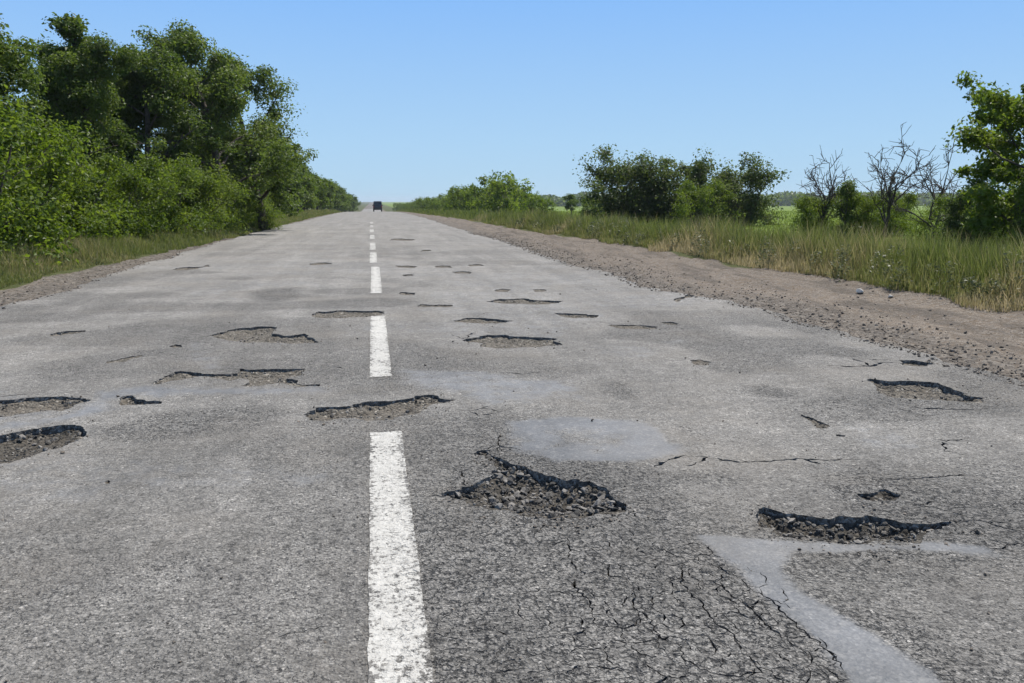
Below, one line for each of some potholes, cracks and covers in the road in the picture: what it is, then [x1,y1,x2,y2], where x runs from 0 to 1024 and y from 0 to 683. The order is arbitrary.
pothole [756,507,949,545]
pothole [857,489,901,501]
pothole [0,396,90,417]
pothole [0,425,87,463]
crack [654,456,851,467]
pothole [463,335,562,349]
pothole [867,379,983,403]
pothole [312,310,384,318]
pothole [210,326,318,344]
pothole [441,450,627,519]
pothole [151,369,320,387]
crack [444,519,846,683]
